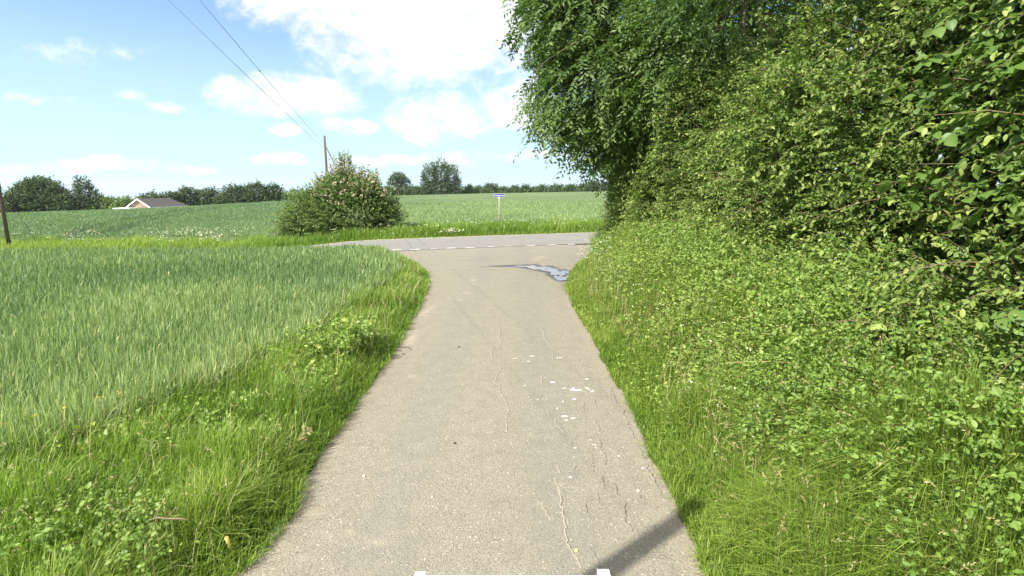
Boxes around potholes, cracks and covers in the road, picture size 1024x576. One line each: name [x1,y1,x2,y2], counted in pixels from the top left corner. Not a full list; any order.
crack [535,321,676,569]
crack [489,309,513,433]
